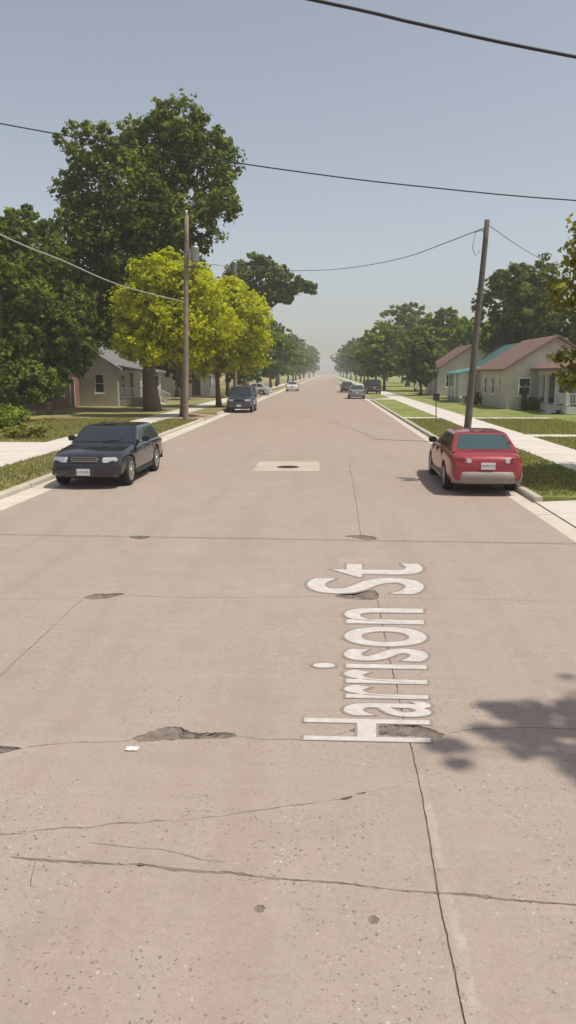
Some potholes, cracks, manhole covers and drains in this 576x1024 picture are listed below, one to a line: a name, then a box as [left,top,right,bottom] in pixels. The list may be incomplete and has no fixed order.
pothole [335,590,379,600]
pothole [131,726,237,742]
crack [0,787,576,906]
pothole [349,725,445,738]
pothole [0,746,22,754]
